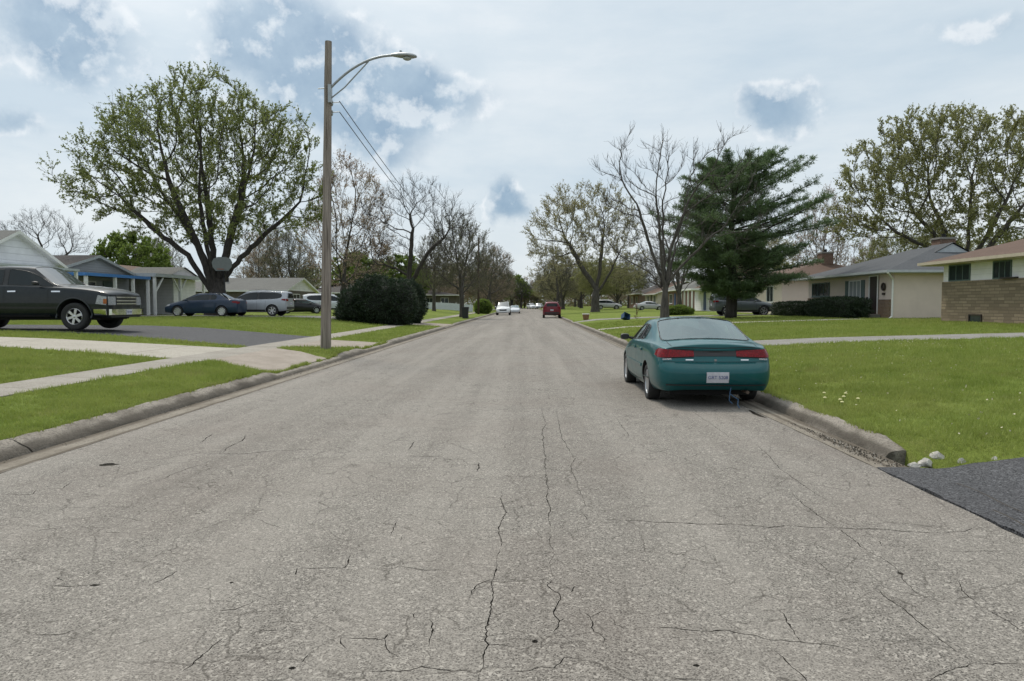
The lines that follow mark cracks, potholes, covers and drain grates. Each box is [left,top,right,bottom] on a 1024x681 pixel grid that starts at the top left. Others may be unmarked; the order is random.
crack [530,411,1024,681]
crack [340,492,507,679]
crack [142,435,308,486]
